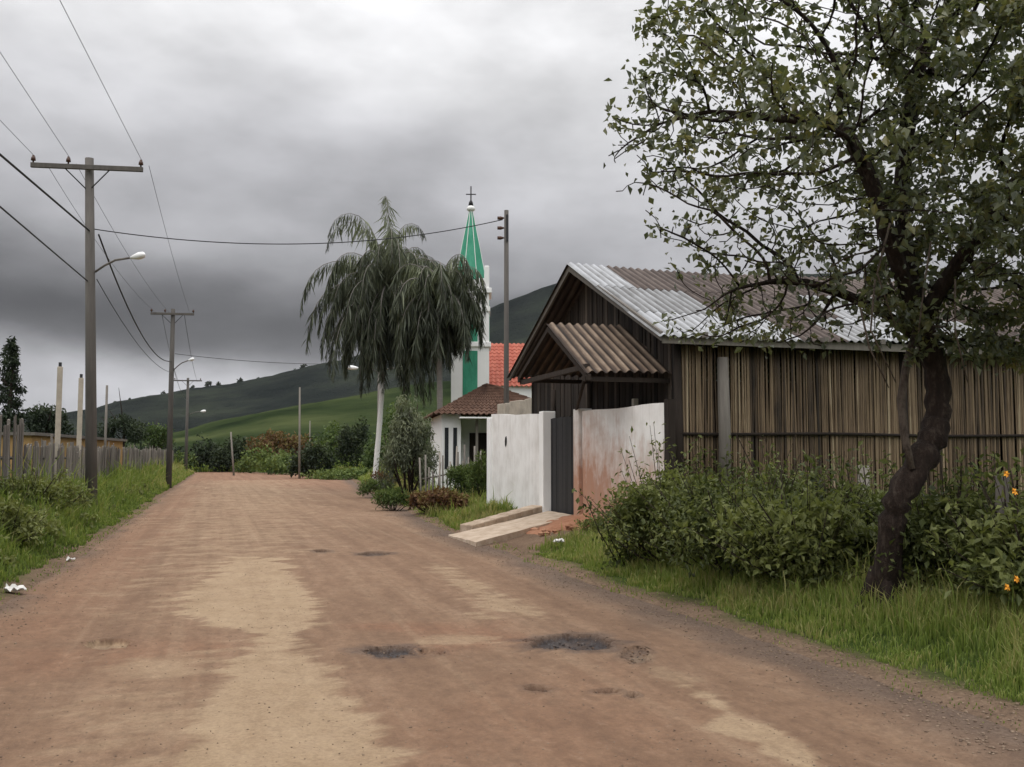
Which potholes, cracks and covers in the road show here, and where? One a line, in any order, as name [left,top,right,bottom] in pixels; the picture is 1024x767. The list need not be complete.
pothole [357,645,422,660]
pothole [520,633,621,652]
pothole [79,638,139,651]
pothole [615,645,653,665]
pothole [587,687,626,695]
pothole [519,683,560,694]
pothole [621,691,644,700]
